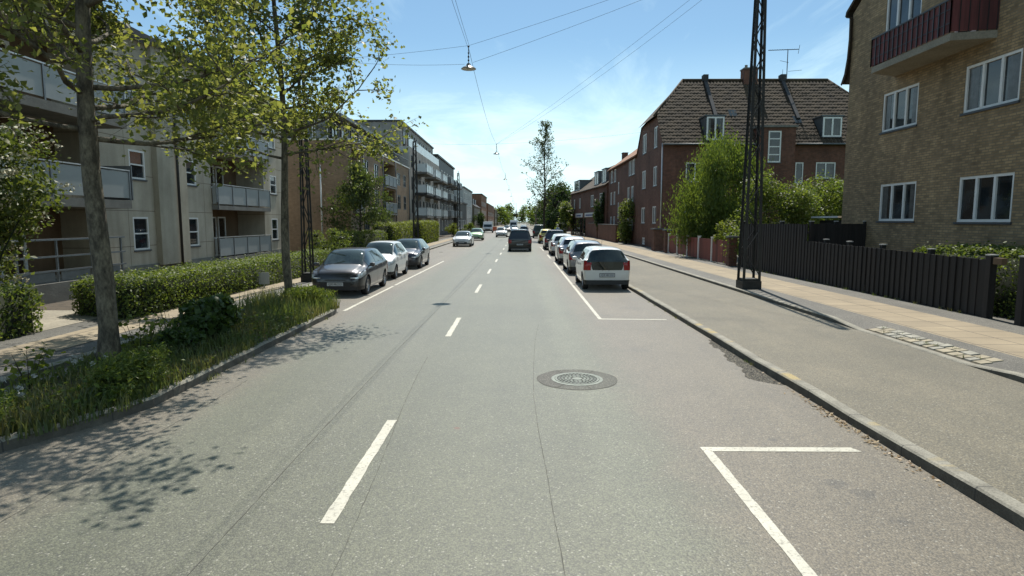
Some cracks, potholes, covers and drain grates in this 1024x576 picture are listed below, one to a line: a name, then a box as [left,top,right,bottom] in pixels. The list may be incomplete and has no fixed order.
manhole cover [537,369,617,390]
crack [533,339,565,573]
